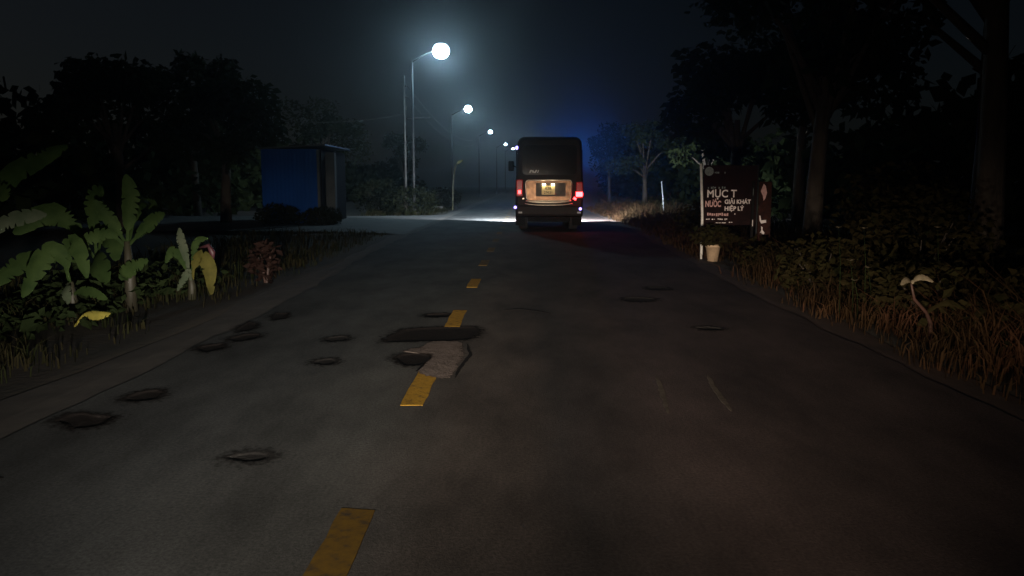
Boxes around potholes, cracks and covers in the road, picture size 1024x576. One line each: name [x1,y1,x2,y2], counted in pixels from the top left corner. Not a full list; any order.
pothole [233,321,261,333]
pothole [321,335,352,343]
pothole [306,357,341,367]
pothole [390,352,432,367]
pothole [268,312,291,321]
pothole [223,333,263,342]
pothole [116,388,170,403]
pothole [379,326,485,343]
pothole [192,342,229,353]
pothole [47,411,120,431]
pothole [217,449,280,465]
